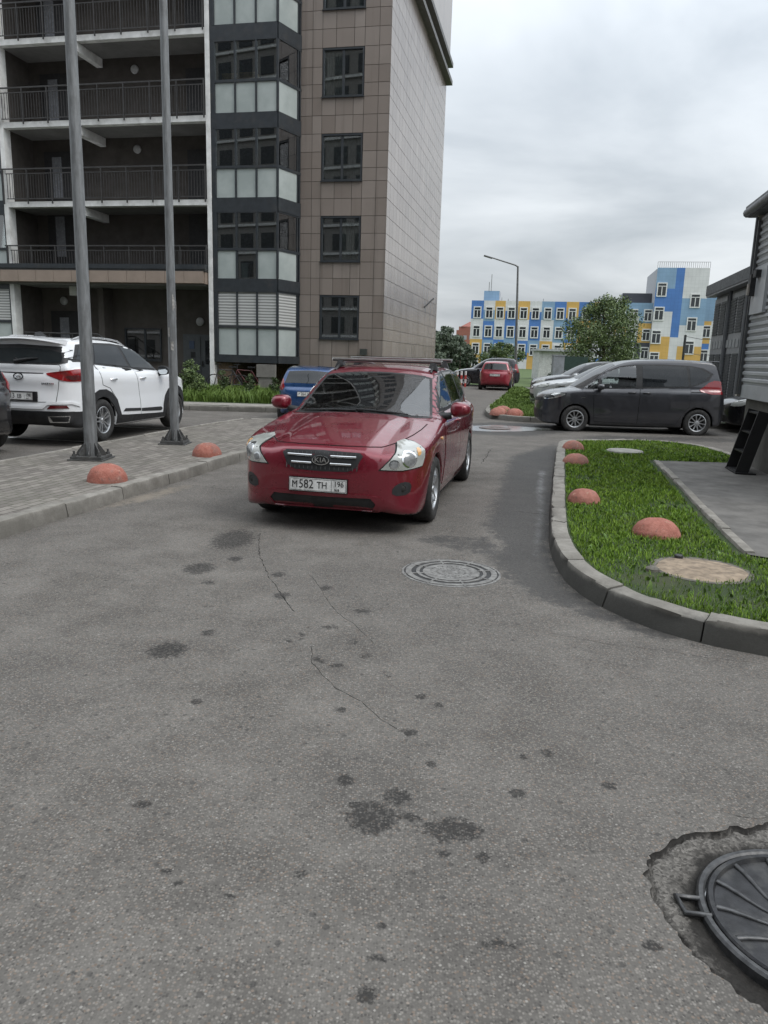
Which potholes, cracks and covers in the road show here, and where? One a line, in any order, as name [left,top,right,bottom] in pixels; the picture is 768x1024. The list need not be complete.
manhole cover [402,559,501,588]
crack [311,648,399,730]
crack [258,535,295,612]
